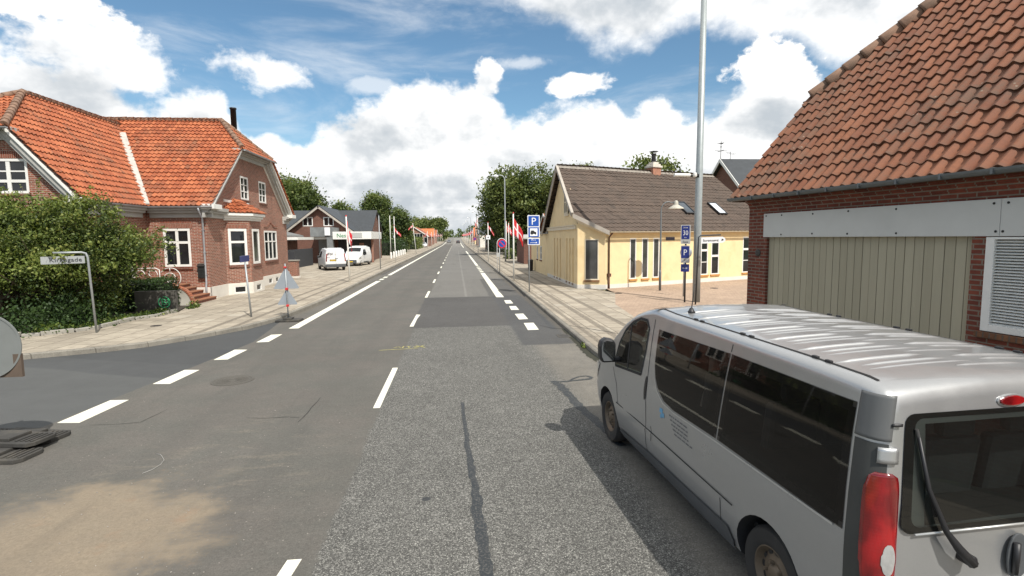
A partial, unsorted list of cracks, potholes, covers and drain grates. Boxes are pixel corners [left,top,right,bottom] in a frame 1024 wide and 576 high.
manhole cover [210,375,255,386]
